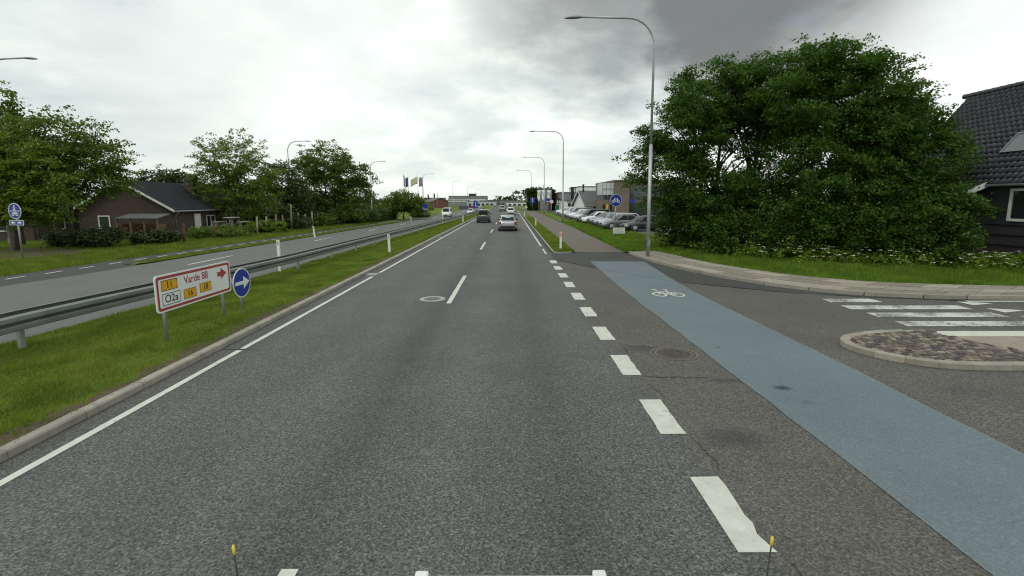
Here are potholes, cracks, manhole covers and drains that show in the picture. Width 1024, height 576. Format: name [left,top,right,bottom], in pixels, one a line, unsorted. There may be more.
crack [692,438,720,470]
manhole cover [649,347,699,361]
